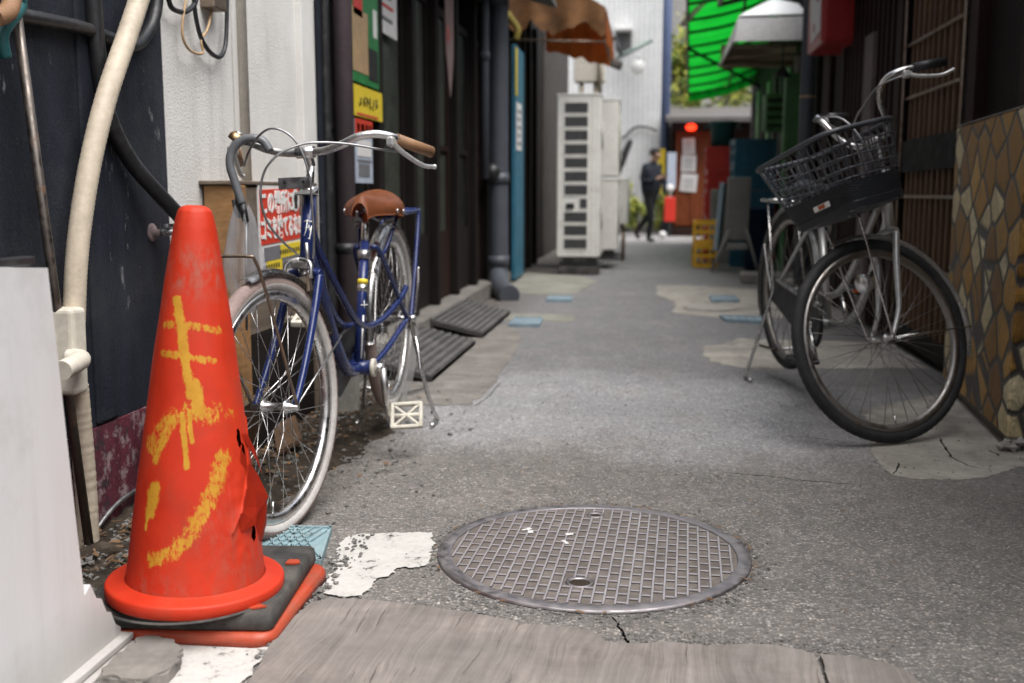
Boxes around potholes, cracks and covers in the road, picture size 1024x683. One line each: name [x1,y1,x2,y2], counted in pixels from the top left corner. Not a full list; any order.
crack [727,472,850,484]
manhole cover [437,505,752,614]
crack [938,437,999,468]
crack [611,616,630,643]
